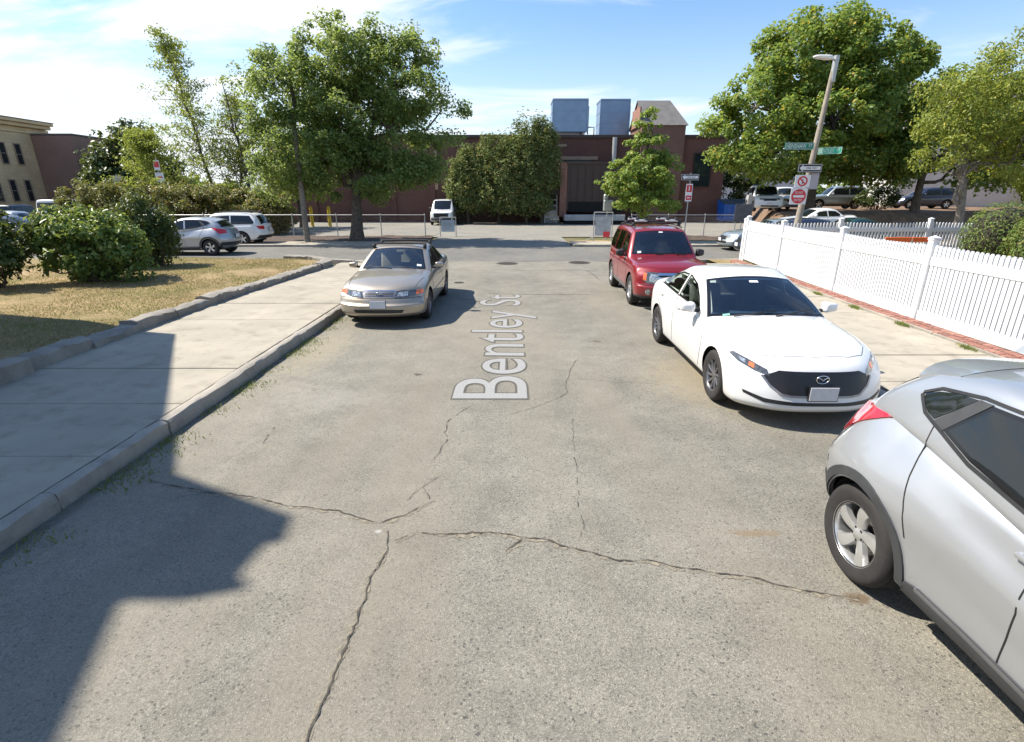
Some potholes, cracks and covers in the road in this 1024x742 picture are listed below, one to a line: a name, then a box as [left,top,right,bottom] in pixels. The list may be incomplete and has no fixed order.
crack [149,358,861,742]
